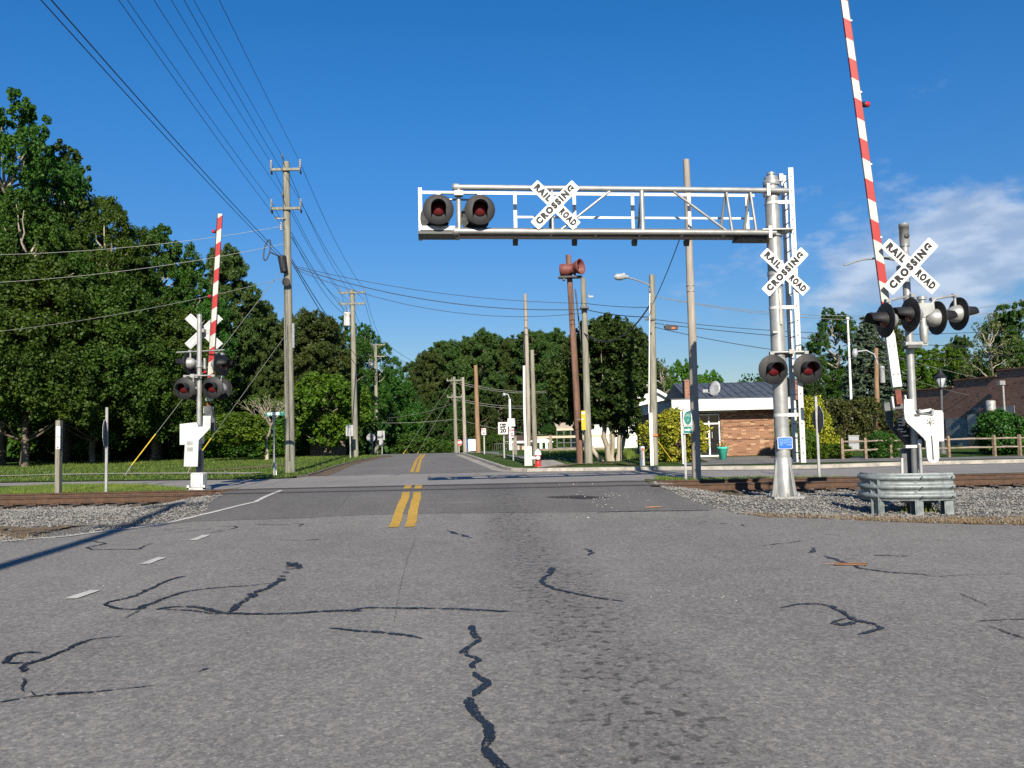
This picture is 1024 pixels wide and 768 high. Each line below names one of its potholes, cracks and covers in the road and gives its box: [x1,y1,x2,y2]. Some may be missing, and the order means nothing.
crack [961,593,1024,638]
crack [0,684,157,702]
